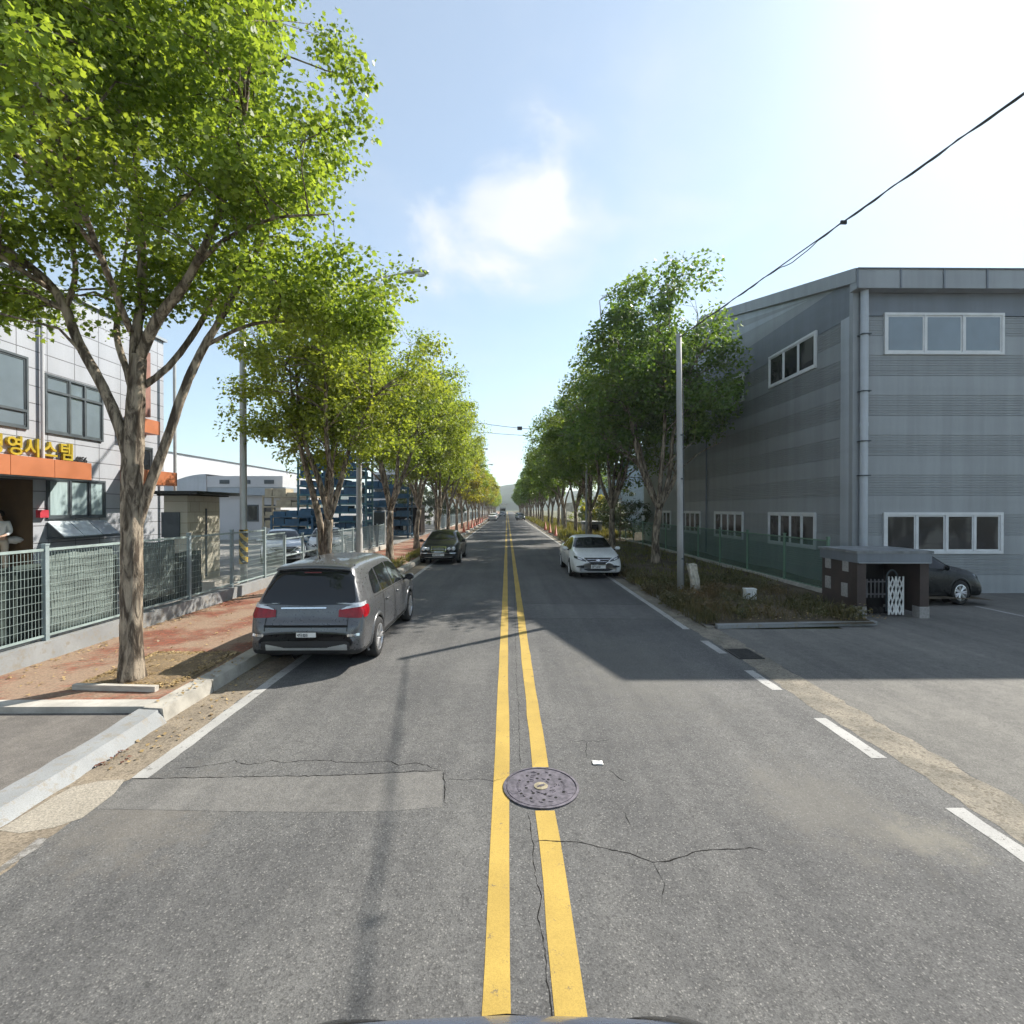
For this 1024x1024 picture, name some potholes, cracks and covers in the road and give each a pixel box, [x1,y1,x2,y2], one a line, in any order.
drain grate [725,649,765,659]
manhole cover [503,767,579,810]
crack [538,840,769,904]
